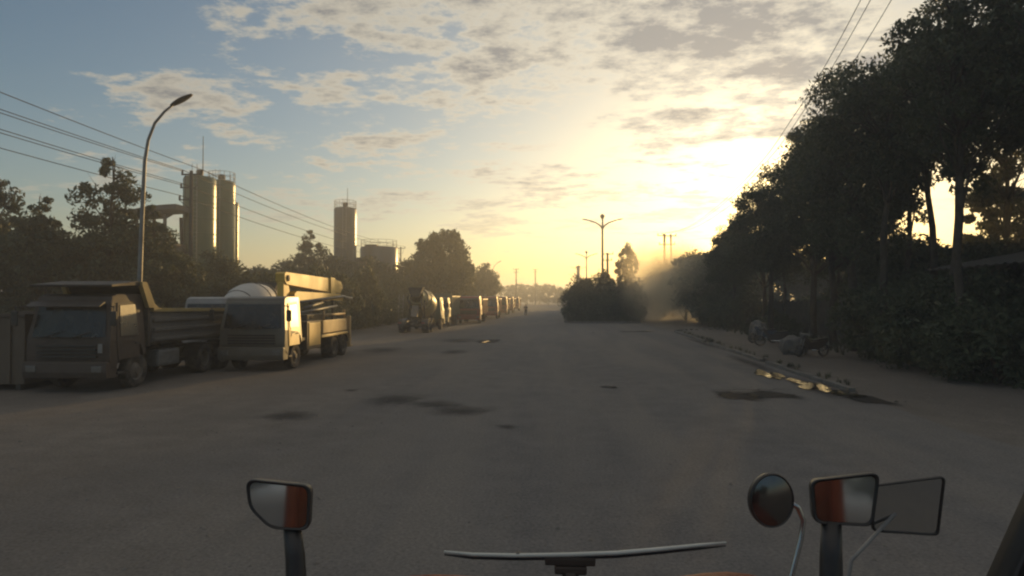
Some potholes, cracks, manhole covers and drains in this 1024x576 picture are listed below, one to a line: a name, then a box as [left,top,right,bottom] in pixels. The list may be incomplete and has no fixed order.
pothole [718,391,764,401]
